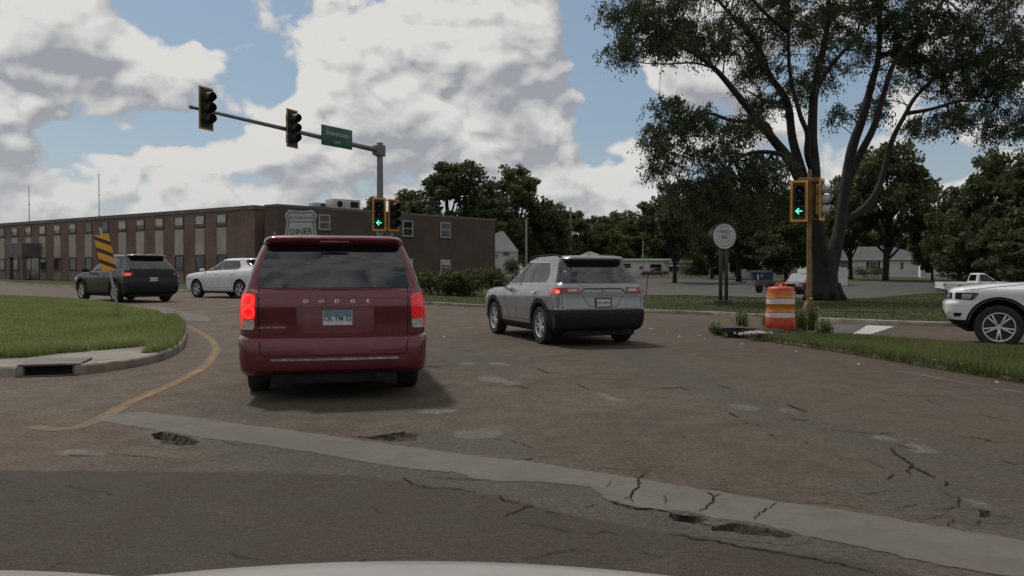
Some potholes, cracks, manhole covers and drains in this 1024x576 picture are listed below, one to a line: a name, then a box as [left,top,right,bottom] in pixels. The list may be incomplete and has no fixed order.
drain grate [15,357,92,378]
pothole [338,430,430,444]
crack [404,477,593,531]
pothole [695,519,810,545]
crack [699,412,1015,530]
pothole [651,510,722,530]
pothole [139,430,212,449]
